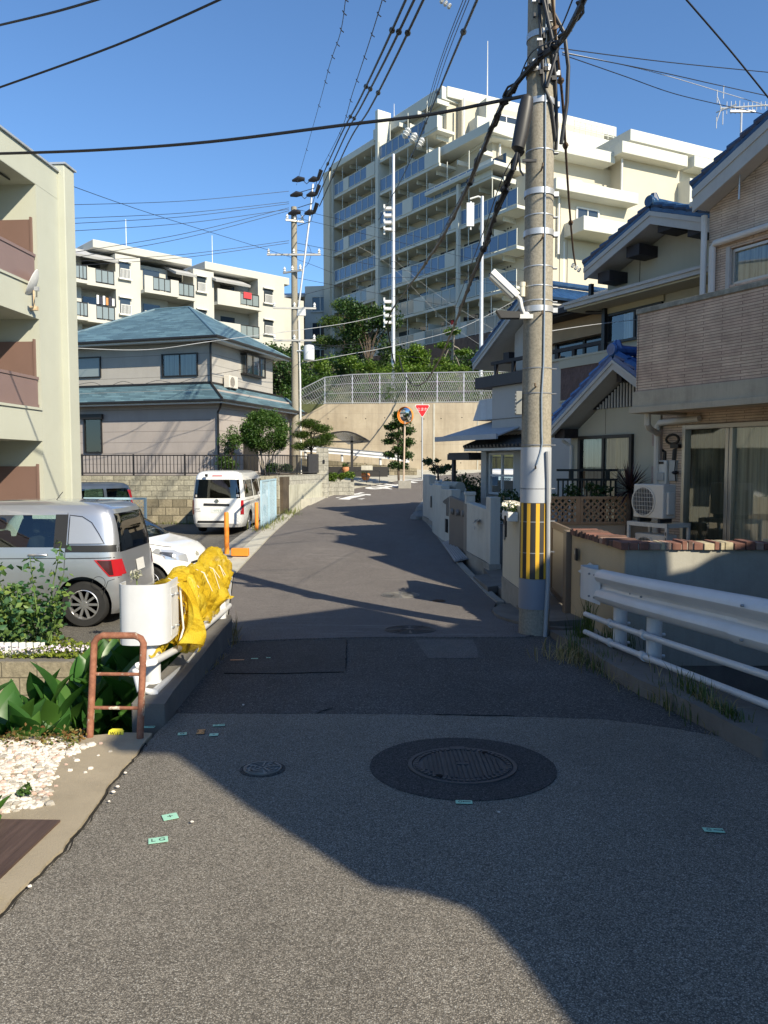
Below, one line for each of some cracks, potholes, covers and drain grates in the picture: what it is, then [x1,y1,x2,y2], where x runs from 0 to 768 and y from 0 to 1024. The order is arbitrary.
manhole cover [243,761,282,775]
manhole cover [384,625,436,634]
manhole cover [408,746,517,785]
